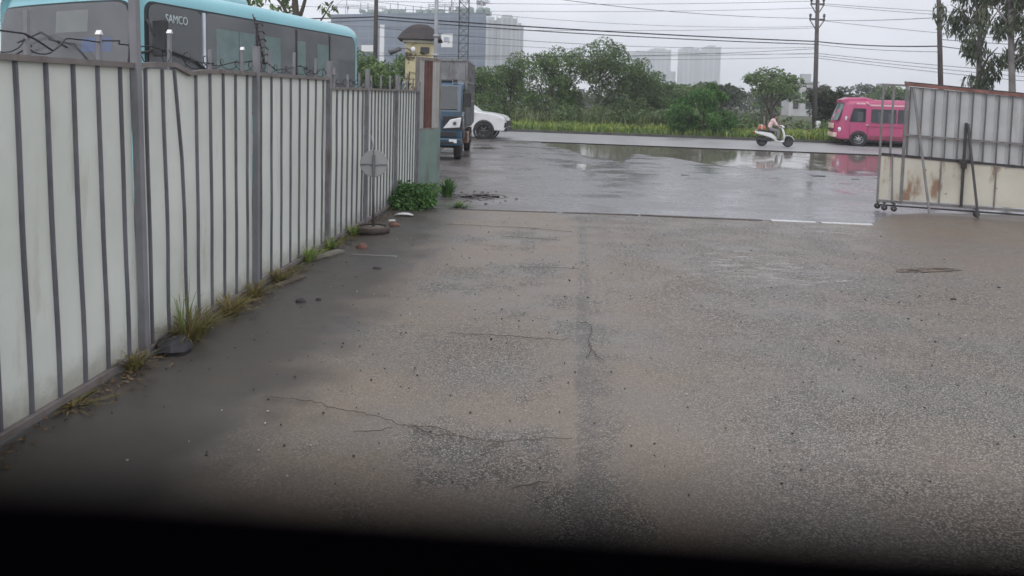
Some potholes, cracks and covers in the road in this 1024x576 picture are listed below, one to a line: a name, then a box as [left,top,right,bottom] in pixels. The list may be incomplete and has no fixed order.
crack [263,396,572,456]
crack [451,322,604,363]
pothole [452,193,510,201]
